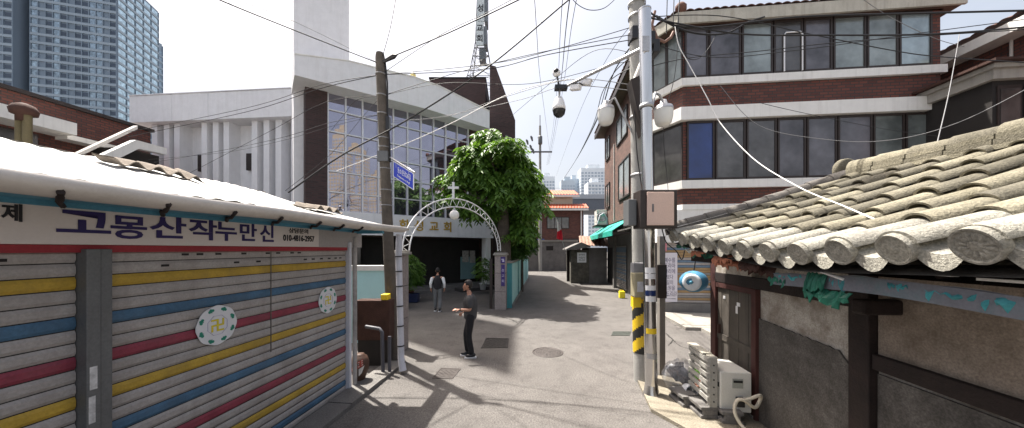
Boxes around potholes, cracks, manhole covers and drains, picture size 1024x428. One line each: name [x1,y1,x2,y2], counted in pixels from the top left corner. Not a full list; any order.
manhole cover [532,347,563,358]
